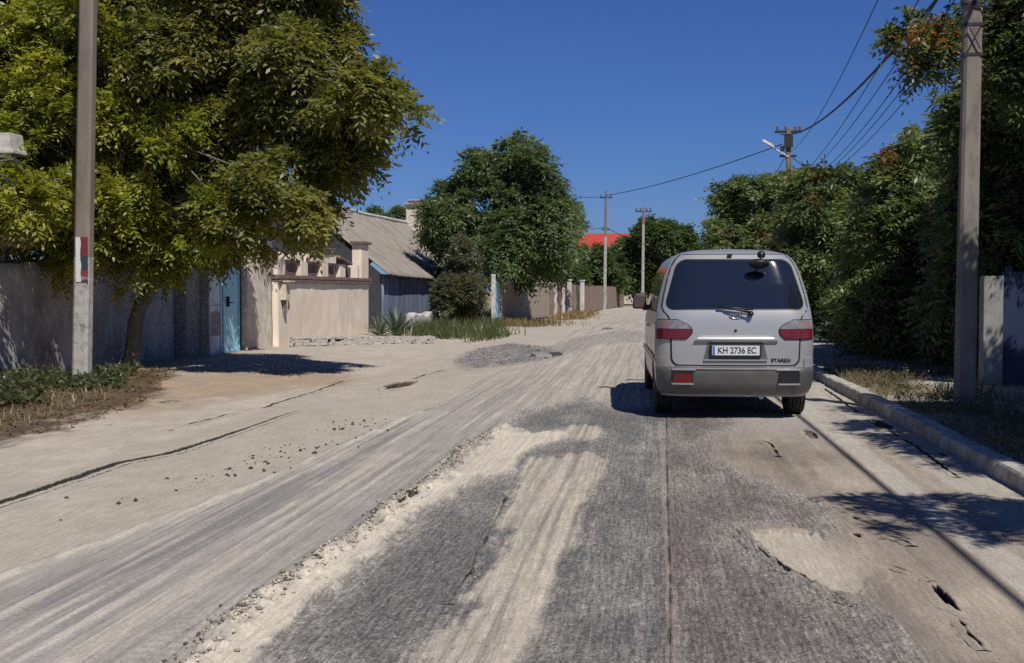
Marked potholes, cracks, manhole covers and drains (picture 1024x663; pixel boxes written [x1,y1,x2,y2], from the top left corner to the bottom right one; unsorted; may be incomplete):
pothole [375,380,424,392]
crack [160,377,369,431]
crack [758,440,784,457]
crack [440,490,517,605]
pothole [736,522,892,609]
pothole [918,580,972,620]
